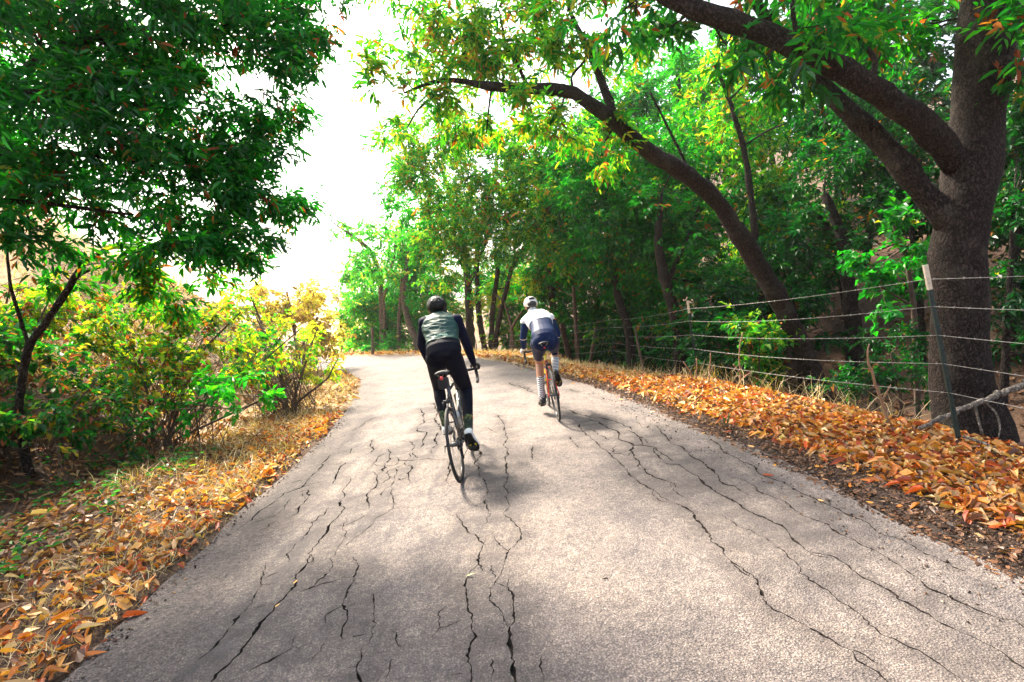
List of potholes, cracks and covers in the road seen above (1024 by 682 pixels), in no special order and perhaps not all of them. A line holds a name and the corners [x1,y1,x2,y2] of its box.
crack [432,415,522,682]
crack [199,403,451,682]
crack [570,410,1024,682]
